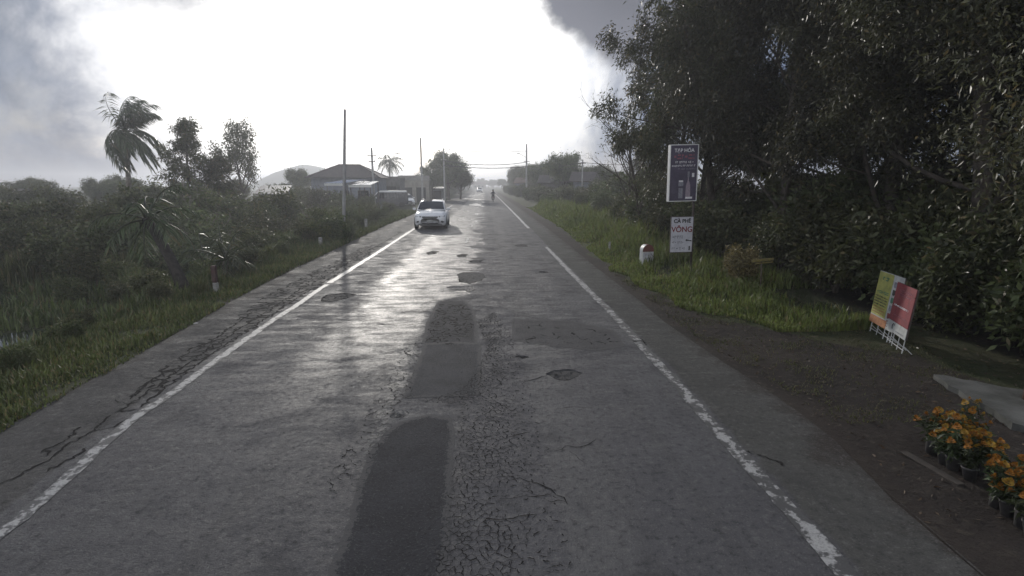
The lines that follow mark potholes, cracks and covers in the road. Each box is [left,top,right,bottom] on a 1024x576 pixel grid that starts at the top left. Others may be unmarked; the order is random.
crack [327,304,571,576]
pothole [321,293,357,302]
crack [0,232,401,484]
pothole [546,369,582,381]
crack [526,324,618,344]
pothole [457,272,486,284]
